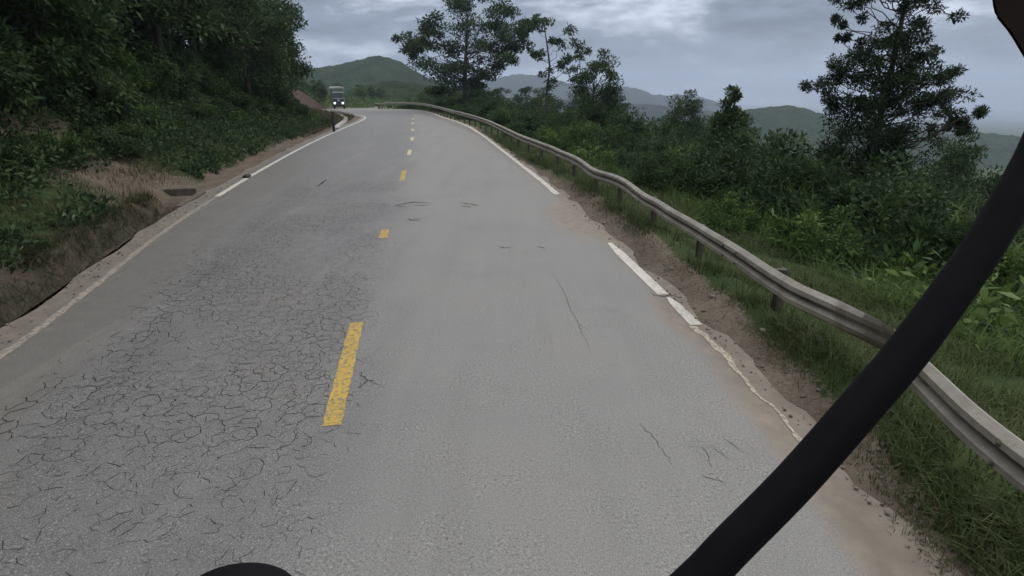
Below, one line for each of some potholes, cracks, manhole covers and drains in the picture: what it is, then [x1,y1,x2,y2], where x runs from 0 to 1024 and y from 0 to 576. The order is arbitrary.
crack [0,164,408,576]
